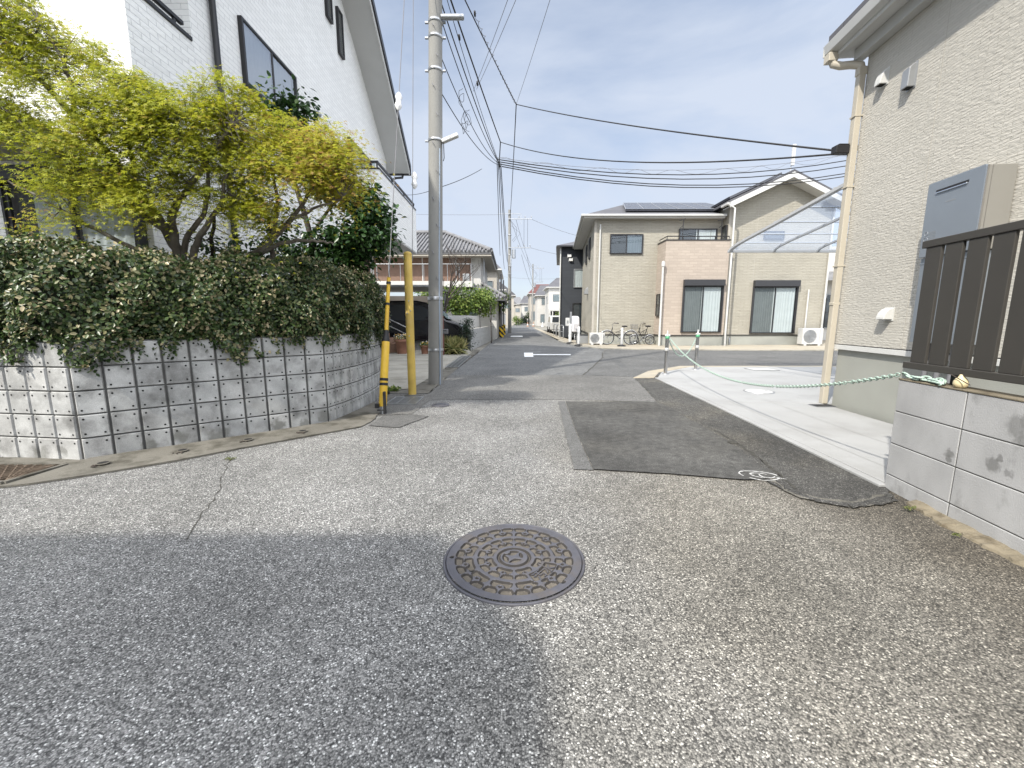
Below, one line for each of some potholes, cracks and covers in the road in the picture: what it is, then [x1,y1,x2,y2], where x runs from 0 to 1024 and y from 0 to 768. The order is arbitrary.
crack [186,457,236,542]
manhole cover [443,524,585,606]
drain grate [0,462,69,485]
